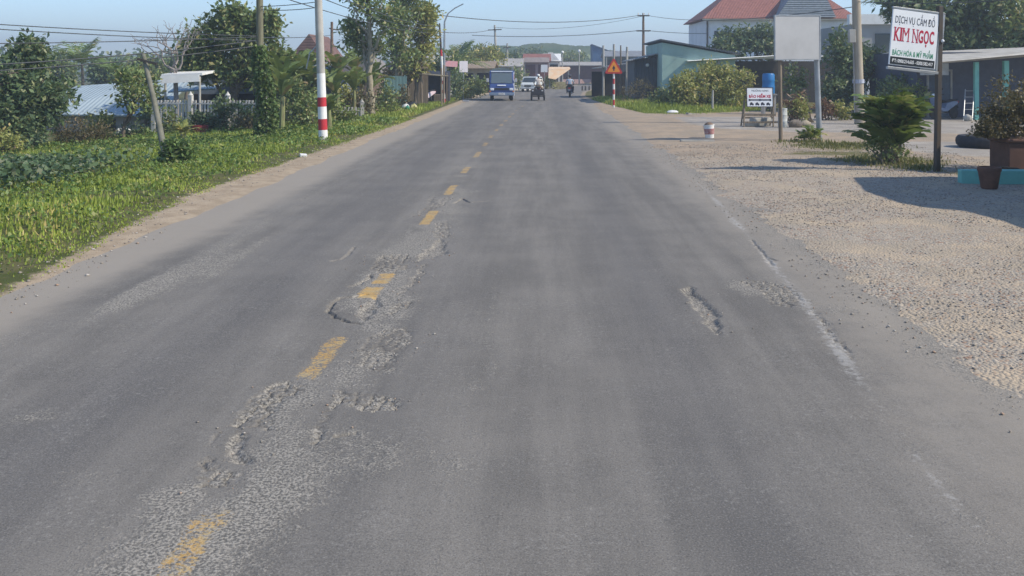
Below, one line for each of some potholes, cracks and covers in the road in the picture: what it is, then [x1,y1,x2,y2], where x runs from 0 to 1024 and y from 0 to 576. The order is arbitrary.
pothole [675,284,736,335]
pothole [347,295,391,322]
crack [170,195,485,495]
pothole [211,428,271,469]
